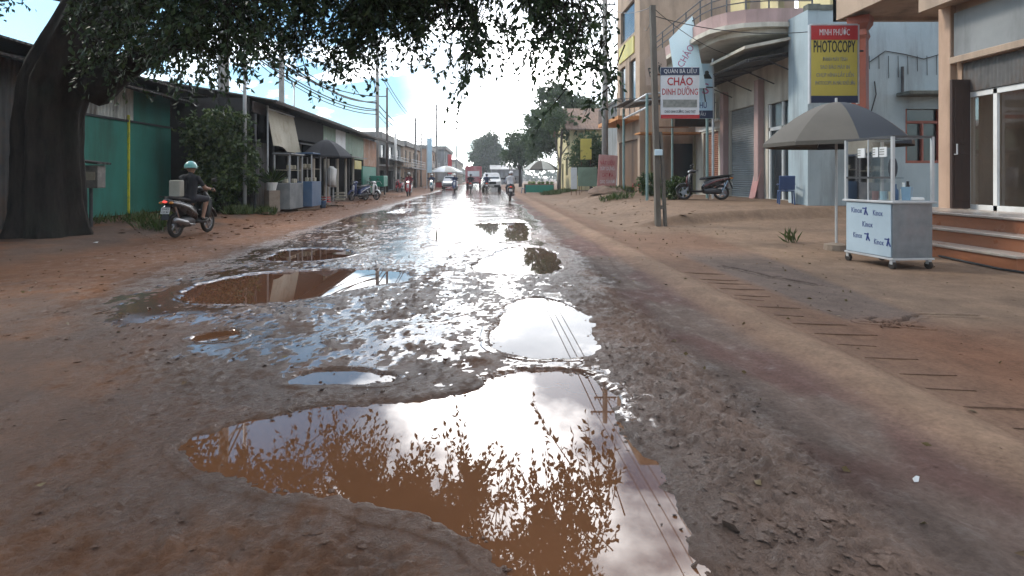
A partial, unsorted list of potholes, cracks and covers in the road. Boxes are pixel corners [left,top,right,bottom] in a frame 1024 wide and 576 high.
pothole [258,247,358,262]
crack [850,312,990,331]
pothole [480,295,612,362]
pothole [180,325,252,344]
pothole [160,364,741,576]
pothole [169,267,419,305]
